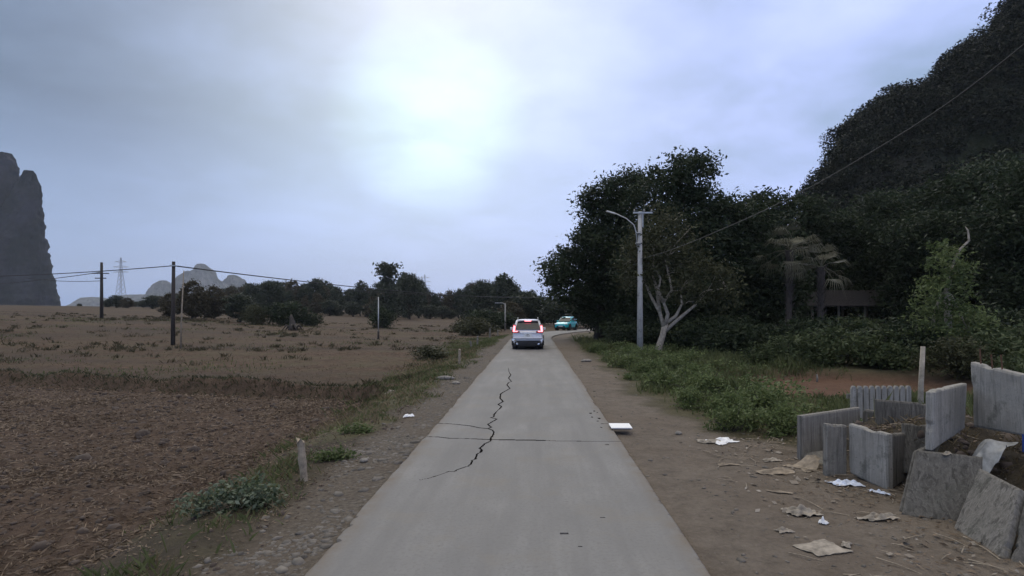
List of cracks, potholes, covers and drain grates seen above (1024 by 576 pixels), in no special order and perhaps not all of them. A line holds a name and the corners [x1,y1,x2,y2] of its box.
crack [422,368,621,480]
